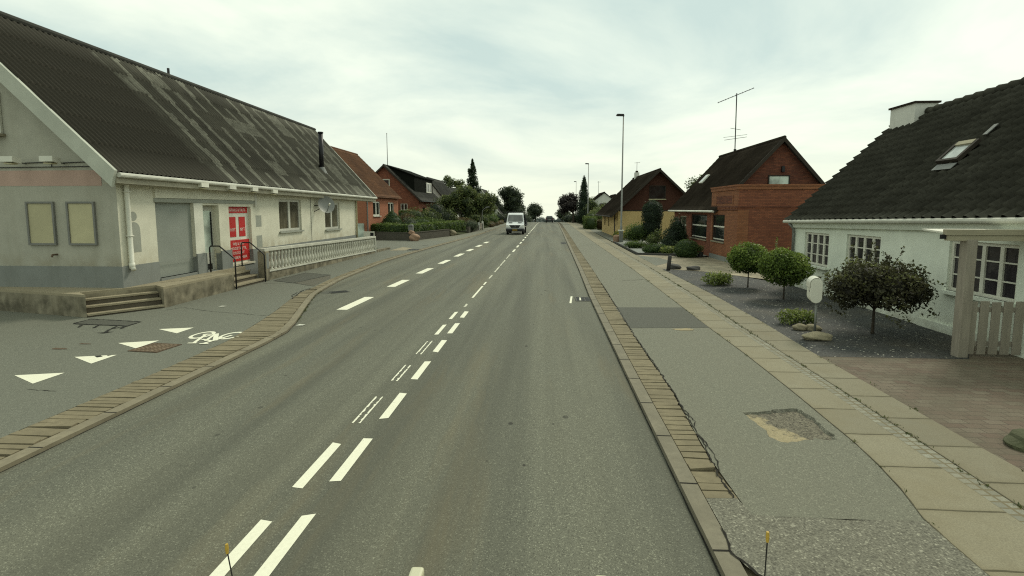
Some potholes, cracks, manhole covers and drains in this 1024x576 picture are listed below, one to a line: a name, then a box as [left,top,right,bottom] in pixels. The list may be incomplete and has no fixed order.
pothole [744,408,836,443]
manhole cover [128,343,182,353]
